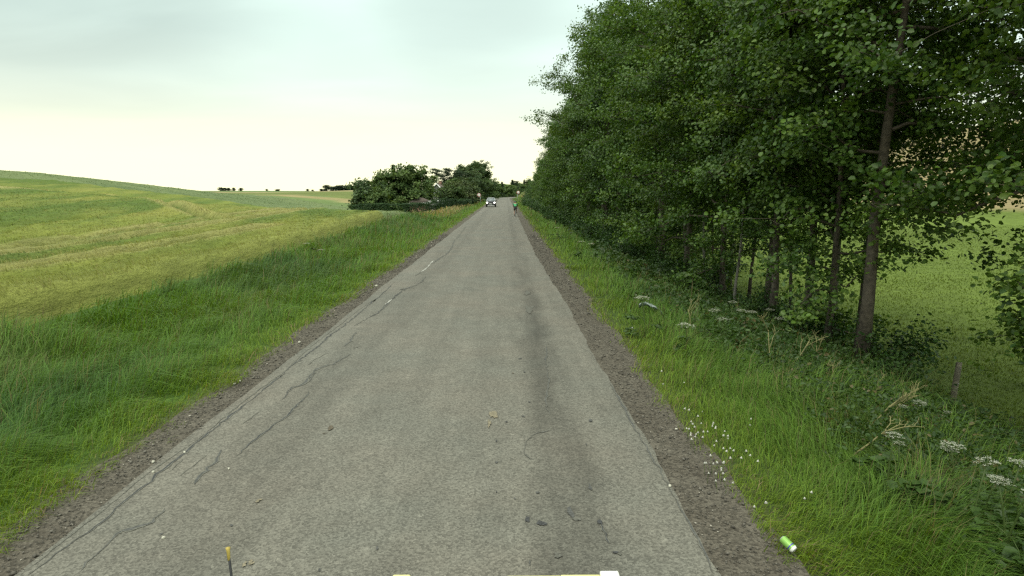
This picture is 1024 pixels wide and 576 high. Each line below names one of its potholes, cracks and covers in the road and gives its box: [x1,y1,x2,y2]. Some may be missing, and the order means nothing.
crack [79,508,165,572]
crack [172,226,466,484]
crack [524,346,550,459]
